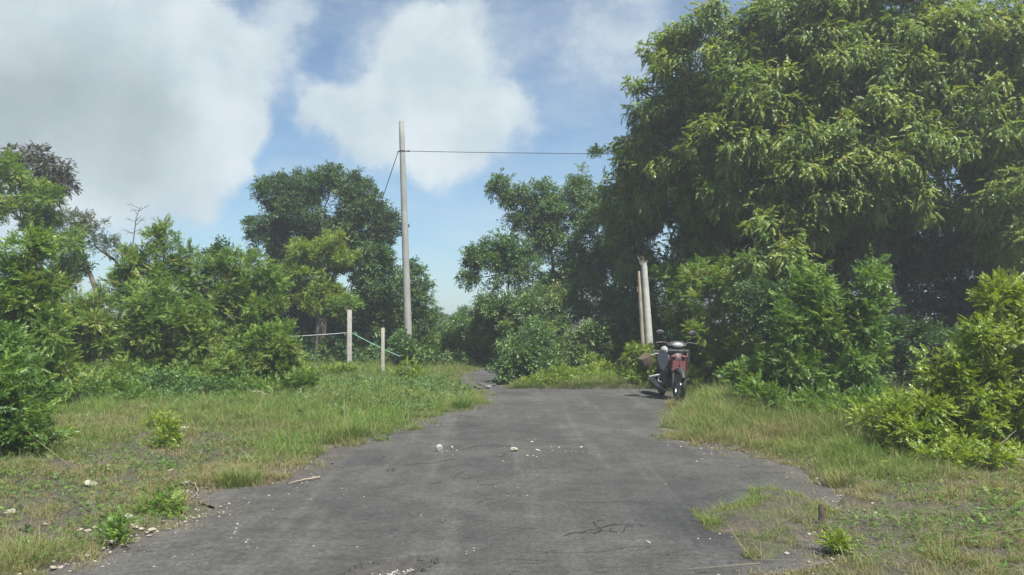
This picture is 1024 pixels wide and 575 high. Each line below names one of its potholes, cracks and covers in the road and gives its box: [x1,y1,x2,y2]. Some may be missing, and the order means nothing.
crack [520,520,648,563]
